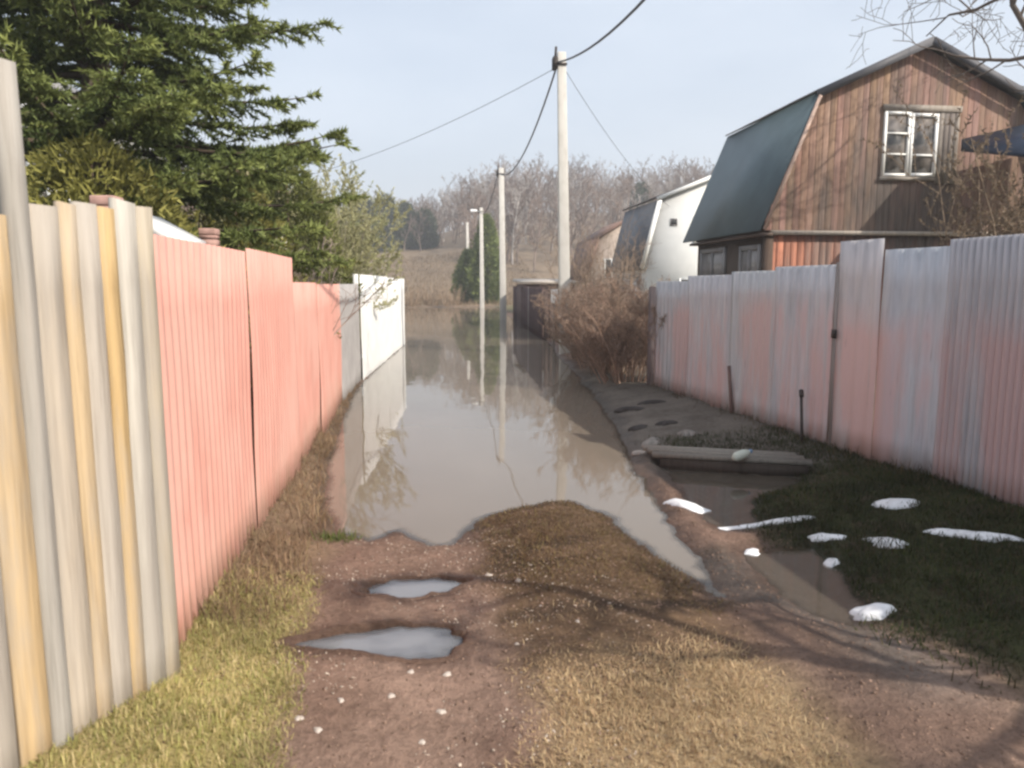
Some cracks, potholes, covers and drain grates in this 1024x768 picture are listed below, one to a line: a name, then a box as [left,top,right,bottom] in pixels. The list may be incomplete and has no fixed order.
pothole [351,574,485,600]
pothole [271,619,481,664]
